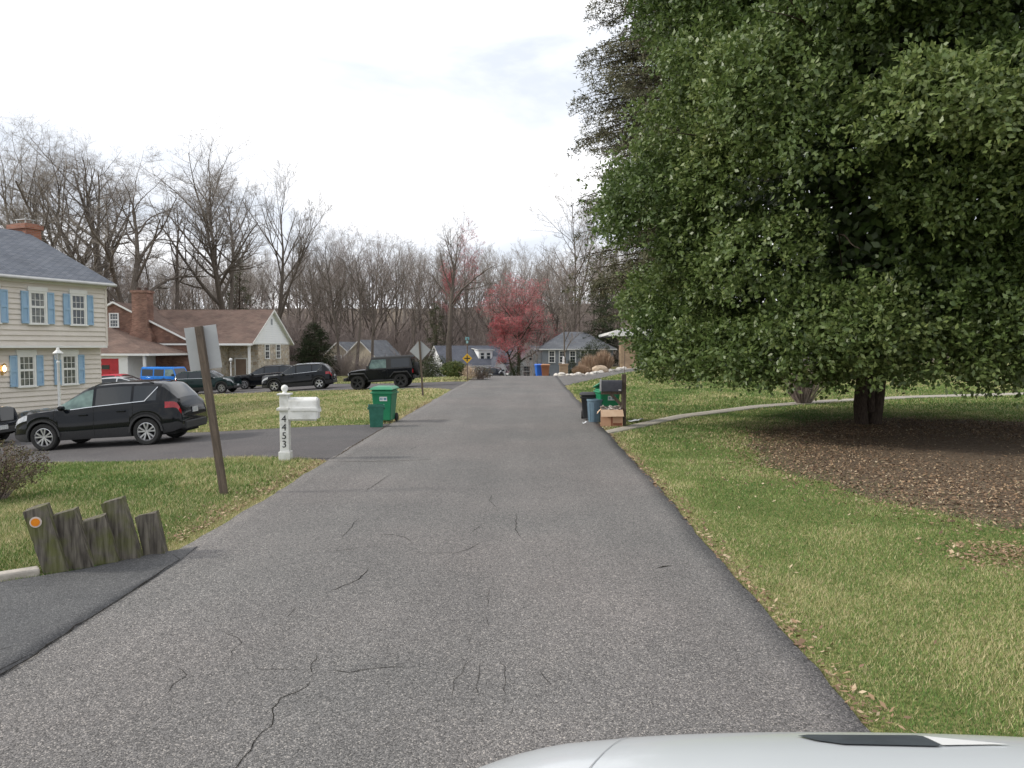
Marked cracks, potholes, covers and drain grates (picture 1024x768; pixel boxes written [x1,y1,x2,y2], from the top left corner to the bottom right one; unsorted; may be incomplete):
crack [452,593,551,698]
crack [235,653,317,768]
